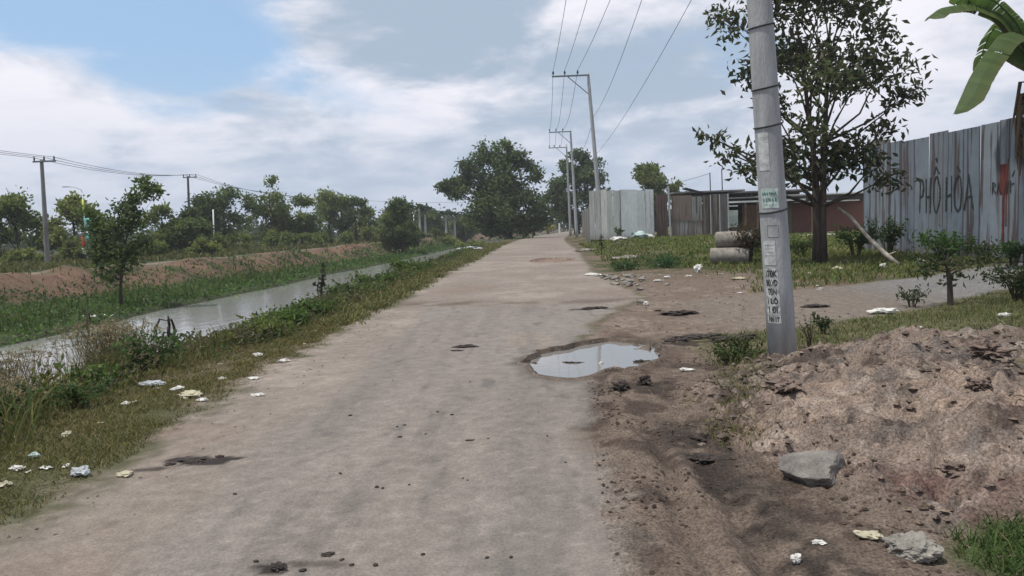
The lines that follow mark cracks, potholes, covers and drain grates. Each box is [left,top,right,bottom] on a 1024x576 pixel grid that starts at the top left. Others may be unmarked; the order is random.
pothole [516,337,667,380]
